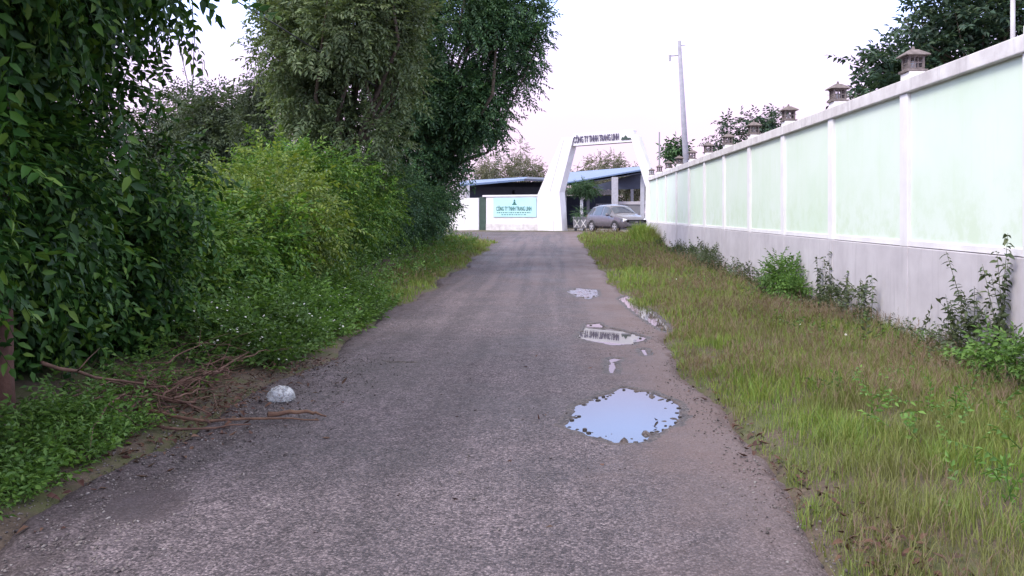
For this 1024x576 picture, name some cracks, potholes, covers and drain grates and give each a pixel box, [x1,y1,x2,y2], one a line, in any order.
pothole [563,287,602,300]
pothole [615,295,674,333]
pothole [600,357,628,374]
pothole [554,386,693,445]
pothole [572,322,652,346]
